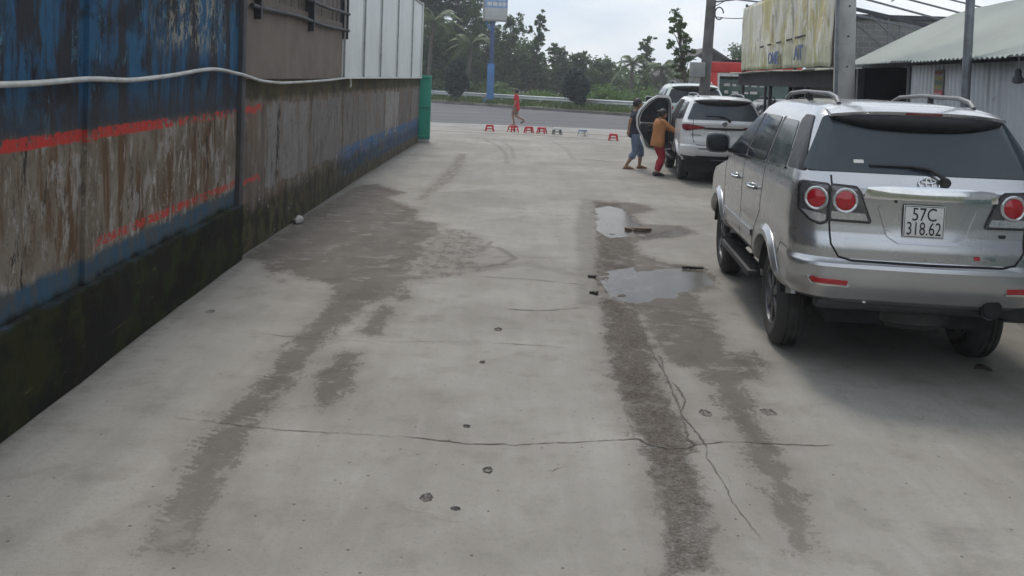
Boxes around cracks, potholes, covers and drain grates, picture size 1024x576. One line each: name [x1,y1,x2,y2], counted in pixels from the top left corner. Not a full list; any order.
crack [406,326,824,539]
pothole [395,484,457,513]
crack [179,417,381,436]
